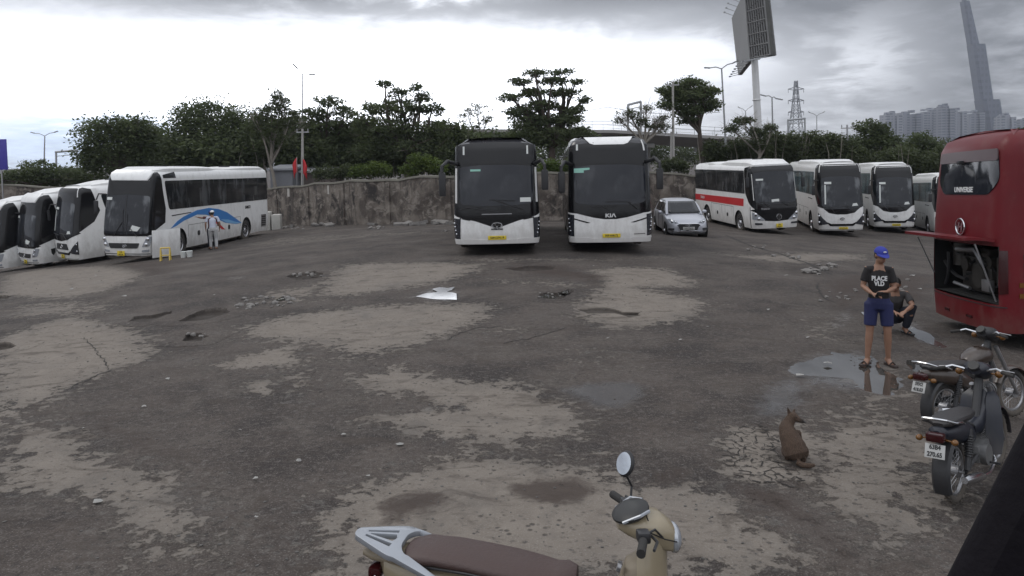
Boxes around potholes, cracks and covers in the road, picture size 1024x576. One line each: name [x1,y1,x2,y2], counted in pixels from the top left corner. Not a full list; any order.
crack [72,339,112,387]
pothole [105,307,190,327]
pothole [557,303,665,321]
pothole [520,286,593,303]
pothole [156,304,251,326]
crack [718,422,805,490]
